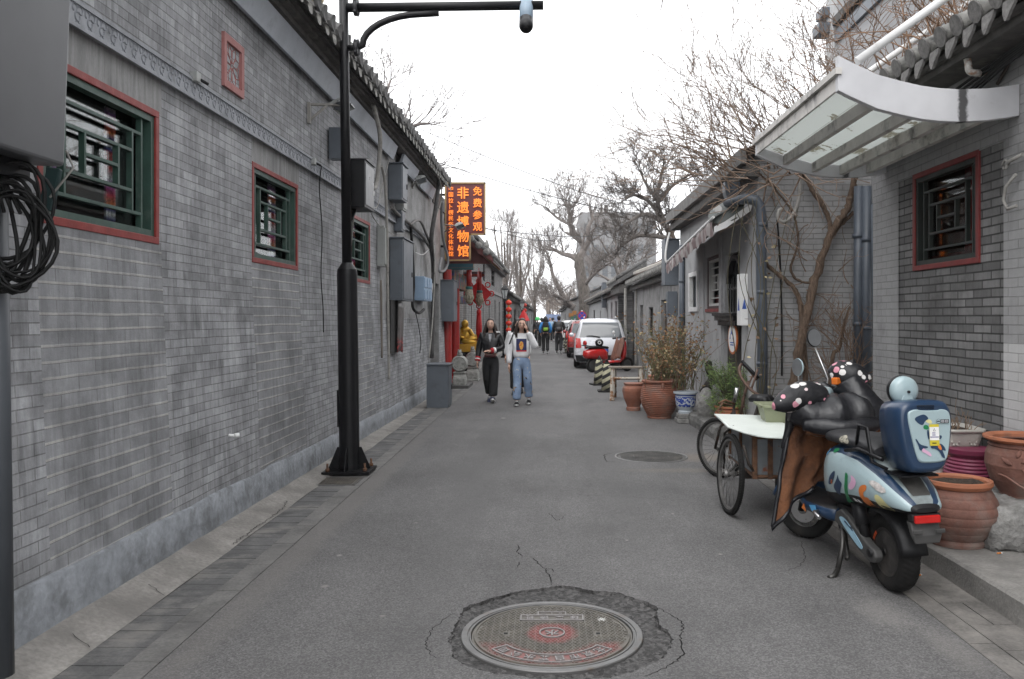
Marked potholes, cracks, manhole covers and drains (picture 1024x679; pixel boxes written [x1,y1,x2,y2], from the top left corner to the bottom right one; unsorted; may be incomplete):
crack [646,609,685,676]
crack [516,545,554,585]
manhole cover [615,450,688,463]
manhole cover [461,601,643,675]
